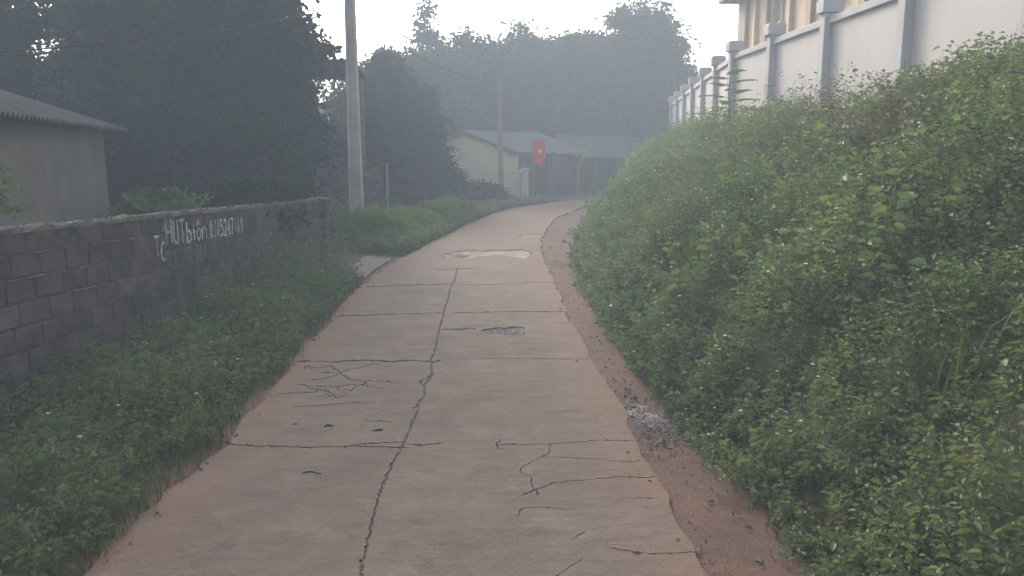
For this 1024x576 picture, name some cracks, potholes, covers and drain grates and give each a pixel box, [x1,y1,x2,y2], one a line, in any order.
crack [496,439,656,515]
pothole [481,326,526,337]
crack [229,268,564,576]
